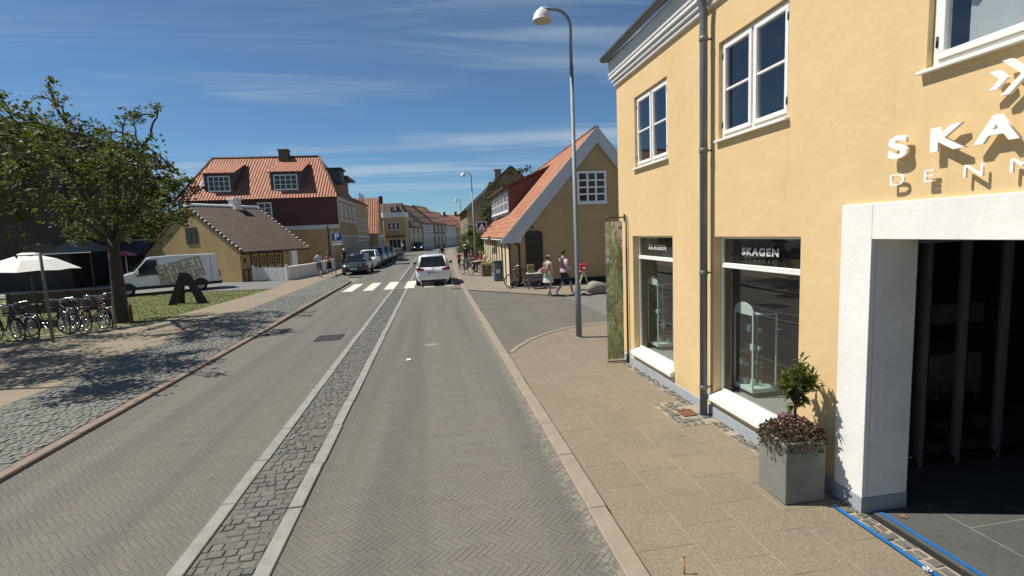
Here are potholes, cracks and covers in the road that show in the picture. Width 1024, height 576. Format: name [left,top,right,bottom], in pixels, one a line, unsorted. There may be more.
manhole cover [313,334,345,342]
manhole cover [676,409,697,417]
